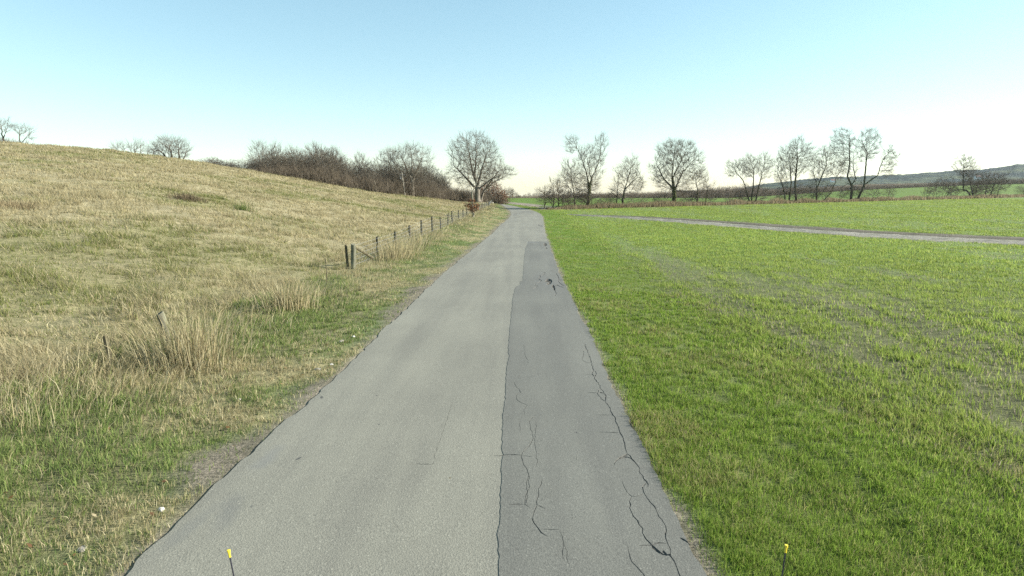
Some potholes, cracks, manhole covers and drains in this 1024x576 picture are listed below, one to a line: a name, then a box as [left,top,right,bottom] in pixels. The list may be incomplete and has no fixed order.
crack [582,344,690,576]
crack [500,382,569,564]
